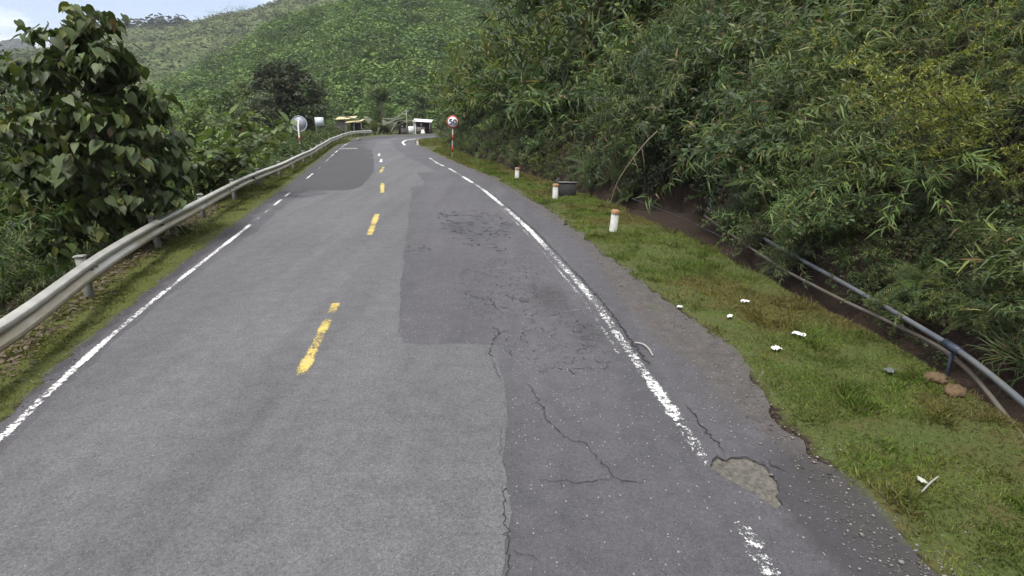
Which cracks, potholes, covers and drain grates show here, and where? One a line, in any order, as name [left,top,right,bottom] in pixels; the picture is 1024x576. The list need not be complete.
crack [436,199,650,376]
crack [686,405,724,451]
crack [528,385,643,488]
pothole [710,455,783,508]
